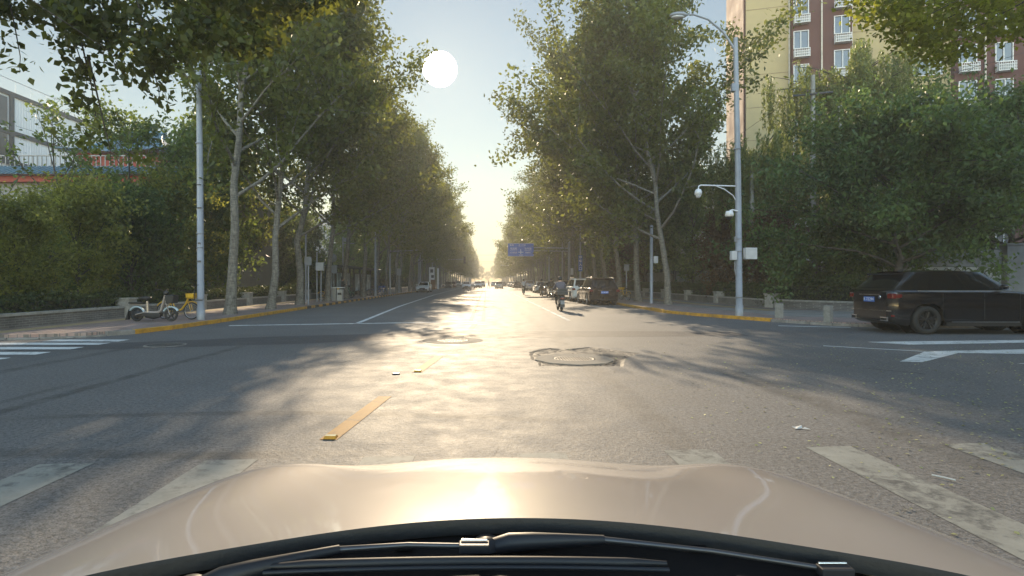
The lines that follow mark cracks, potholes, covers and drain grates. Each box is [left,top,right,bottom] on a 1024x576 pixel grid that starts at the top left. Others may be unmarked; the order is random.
manhole cover [535,354,614,366]
